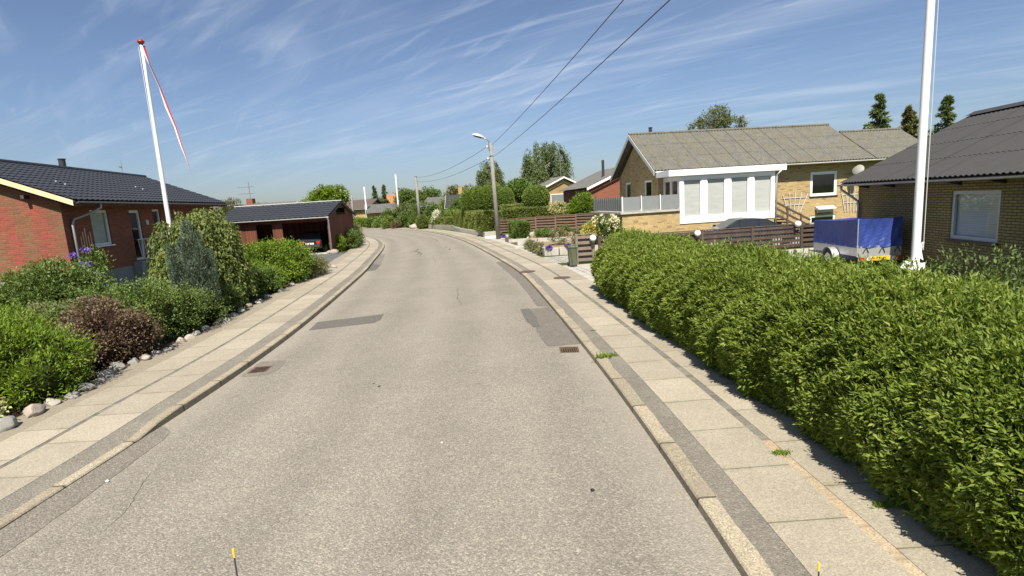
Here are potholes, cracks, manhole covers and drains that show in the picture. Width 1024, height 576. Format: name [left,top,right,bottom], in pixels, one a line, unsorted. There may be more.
drain grate [247,366,272,374]
